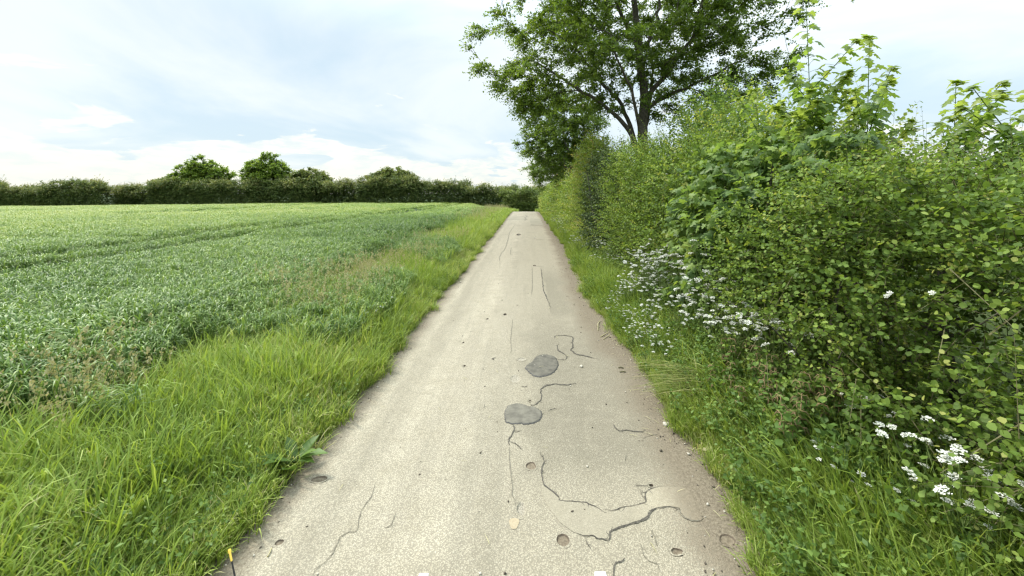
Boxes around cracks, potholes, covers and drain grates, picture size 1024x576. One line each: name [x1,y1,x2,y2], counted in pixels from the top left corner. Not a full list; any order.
crack [540,452,702,576]
crack [554,335,597,360]
pothole [272,538,287,548]
crack [521,383,576,415]
pothole [524,461,538,471]
crack [313,485,375,574]
pothole [669,546,686,556]
pothole [309,475,329,483]
pothole [554,532,572,549]
